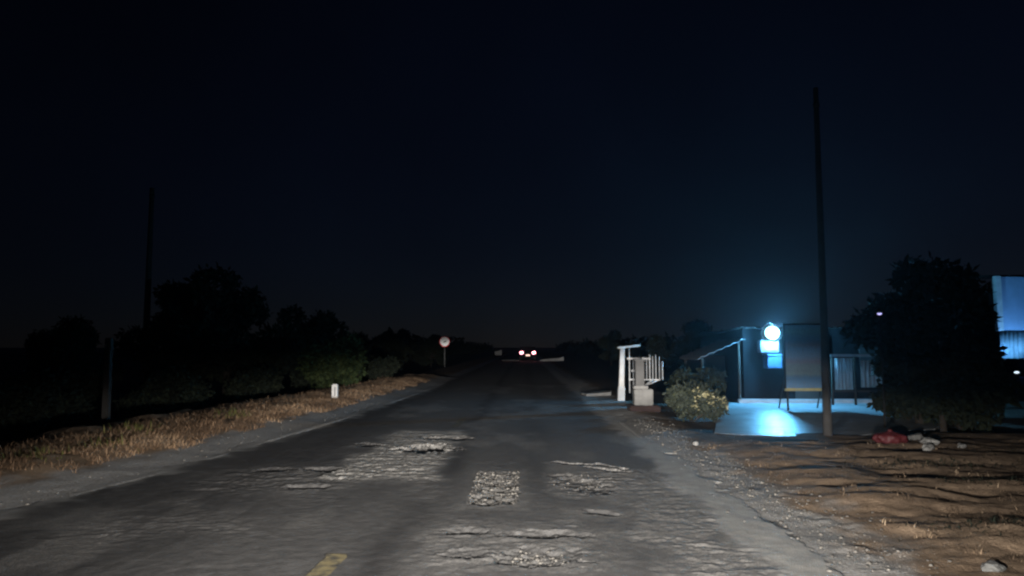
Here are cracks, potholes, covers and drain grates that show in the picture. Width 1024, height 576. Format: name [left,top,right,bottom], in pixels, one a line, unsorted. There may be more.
pothole [440,526,490,535]
pothole [390,443,464,454]
pothole [545,472,615,495]
pothole [495,529,595,539]
pothole [581,509,622,517]
pothole [492,544,598,569]
